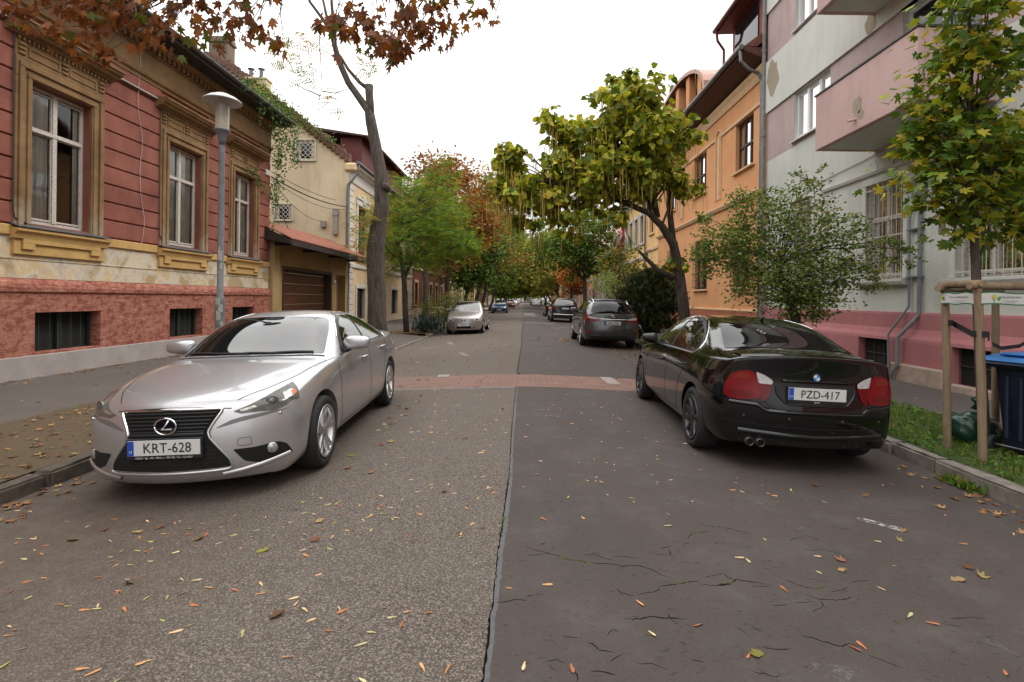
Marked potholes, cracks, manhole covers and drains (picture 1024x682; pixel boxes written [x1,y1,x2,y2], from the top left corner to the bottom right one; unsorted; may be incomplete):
crack [764,634,902,668]
crack [525,525,771,596]
crack [774,579,867,612]
crack [547,614,684,681]
